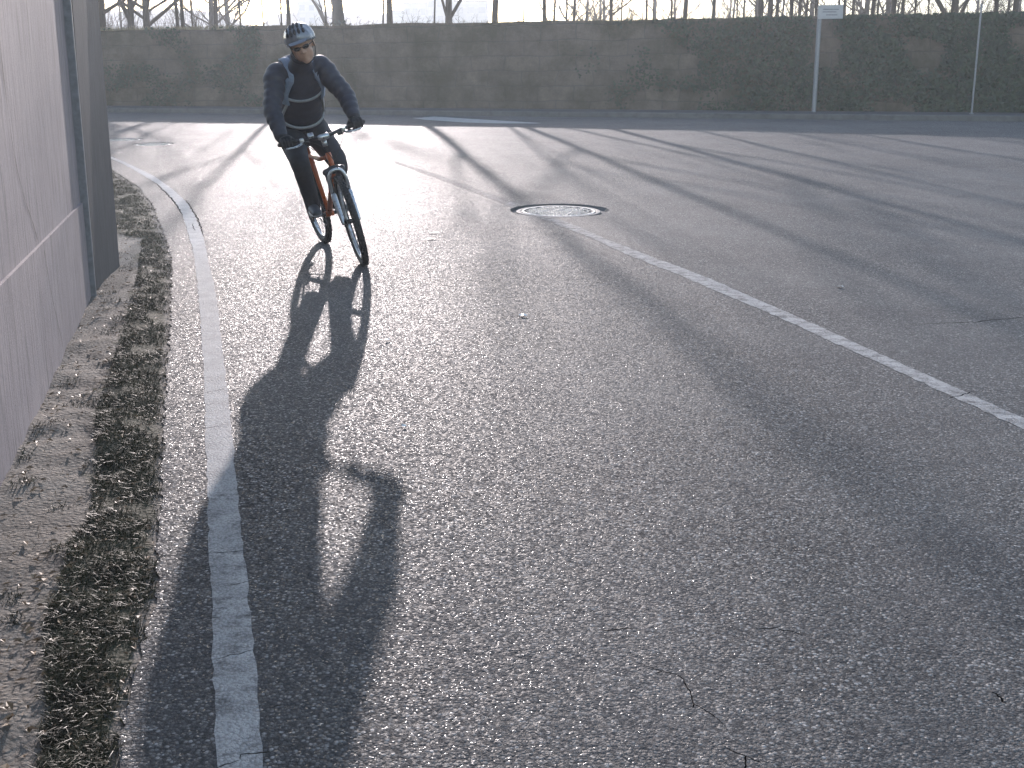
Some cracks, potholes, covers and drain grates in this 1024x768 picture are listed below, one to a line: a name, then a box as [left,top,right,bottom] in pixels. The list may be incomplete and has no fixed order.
crack [645,665,725,726]
manhole cover [510,204,610,217]
